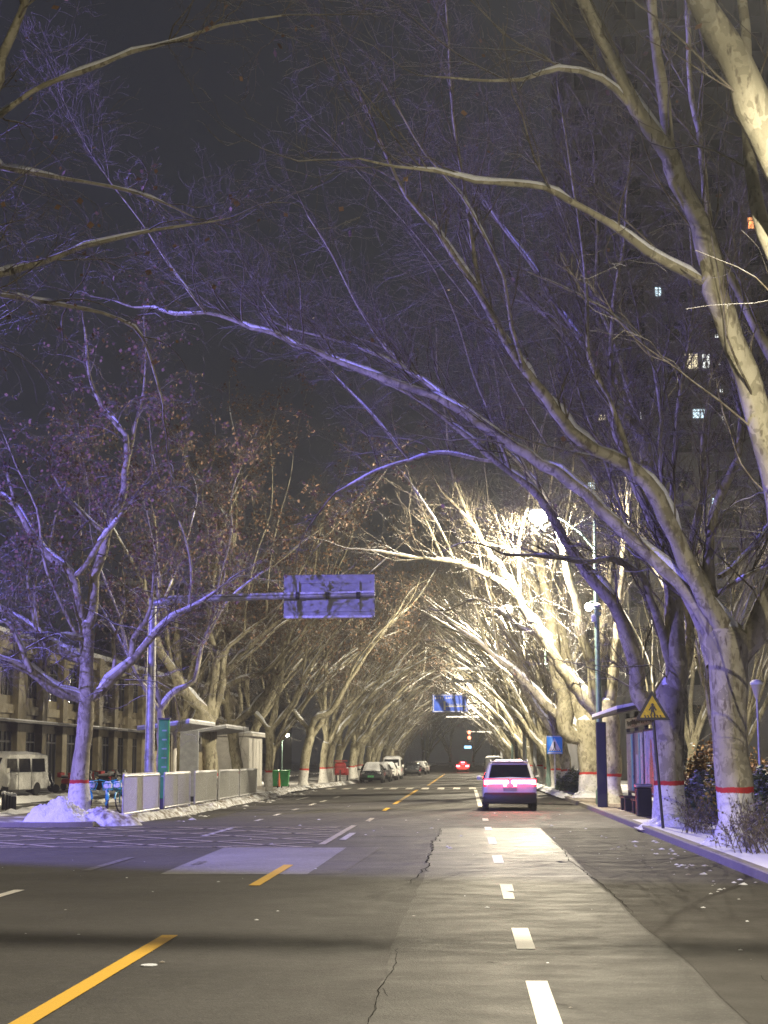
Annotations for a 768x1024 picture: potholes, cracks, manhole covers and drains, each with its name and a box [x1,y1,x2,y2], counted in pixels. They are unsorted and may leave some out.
crack [367,949,397,1024]
crack [410,827,633,912]
